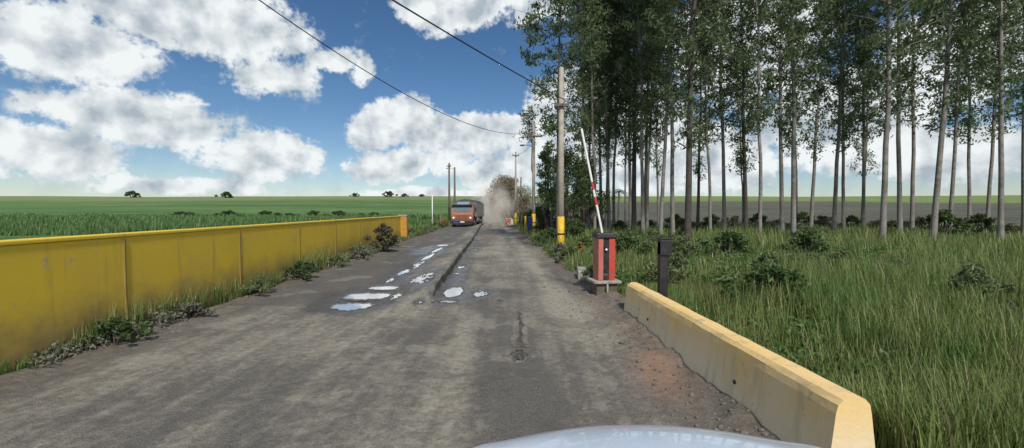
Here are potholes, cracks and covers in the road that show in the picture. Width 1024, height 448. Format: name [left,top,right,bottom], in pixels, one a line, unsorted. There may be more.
crack [511,311,530,347]
pothole [403,271,439,287]
pothole [441,286,465,299]
pothole [470,288,491,298]
pothole [325,301,380,312]
pothole [336,292,393,302]
pothole [509,348,530,362]
